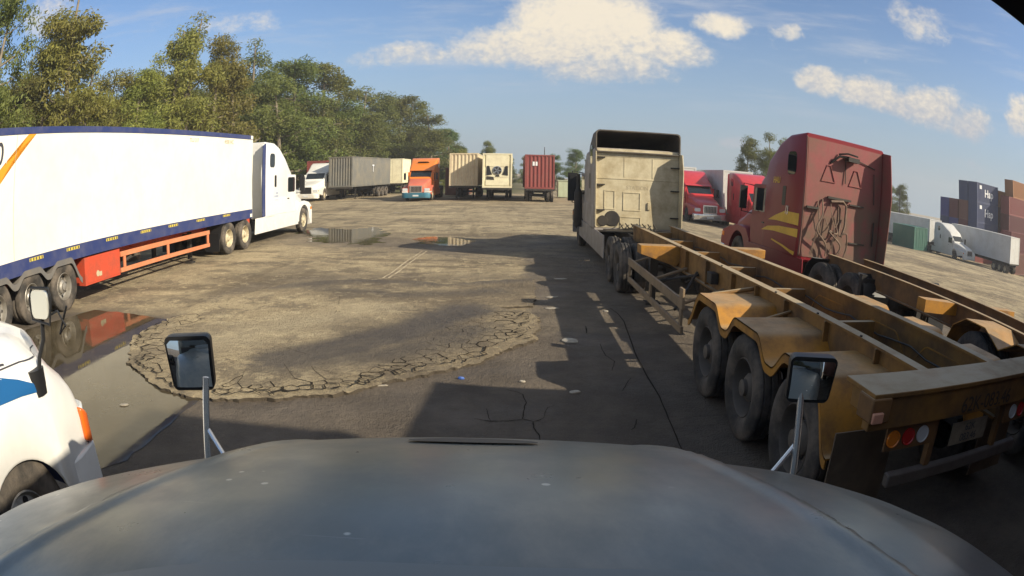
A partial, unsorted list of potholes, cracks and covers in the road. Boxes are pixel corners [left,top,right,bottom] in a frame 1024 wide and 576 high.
crack [585,308,683,450]
crack [474,389,554,440]
crack [134,296,531,395]
